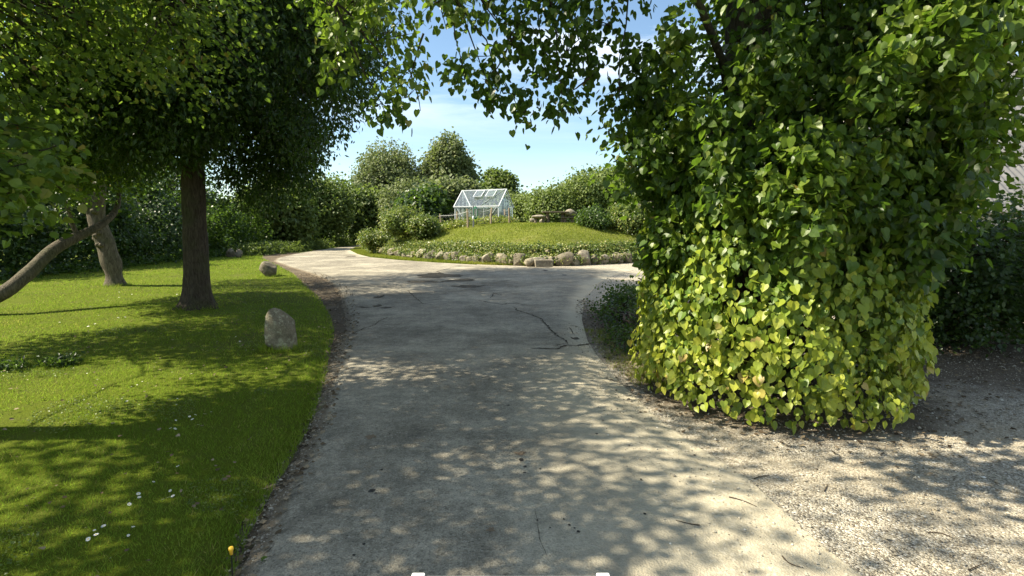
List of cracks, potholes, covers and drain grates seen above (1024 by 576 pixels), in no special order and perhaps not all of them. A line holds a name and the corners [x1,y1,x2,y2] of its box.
crack [477,280,591,349]
